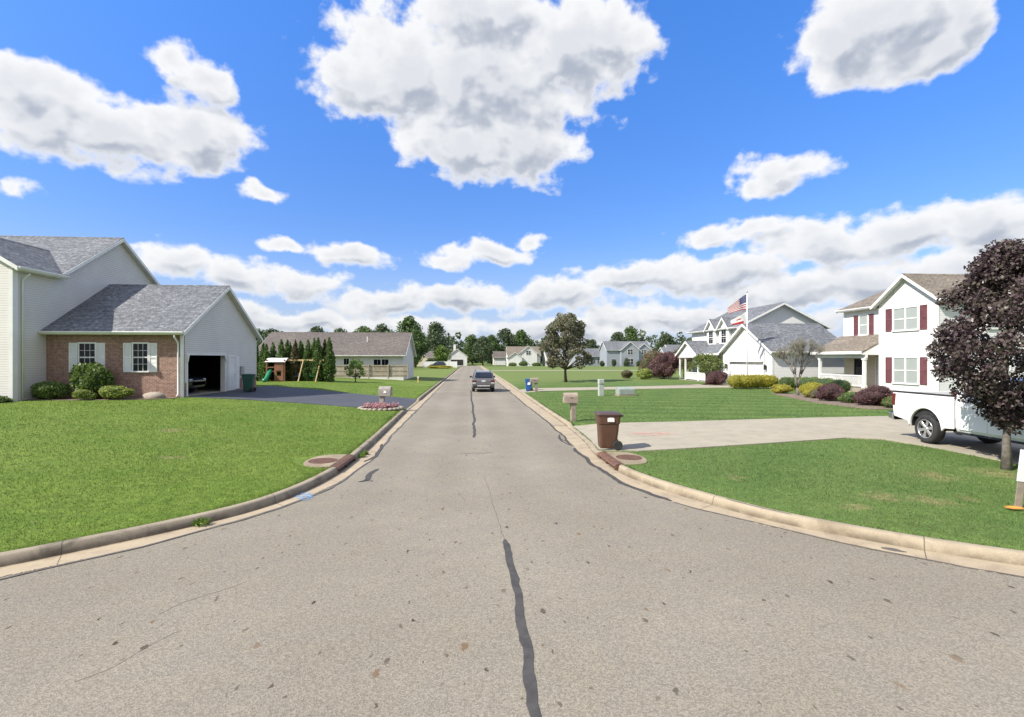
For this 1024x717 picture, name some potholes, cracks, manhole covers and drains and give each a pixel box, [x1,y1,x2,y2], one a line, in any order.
drain grate [303,454,356,473]
drain grate [597,451,647,471]
crack [75,630,181,682]
